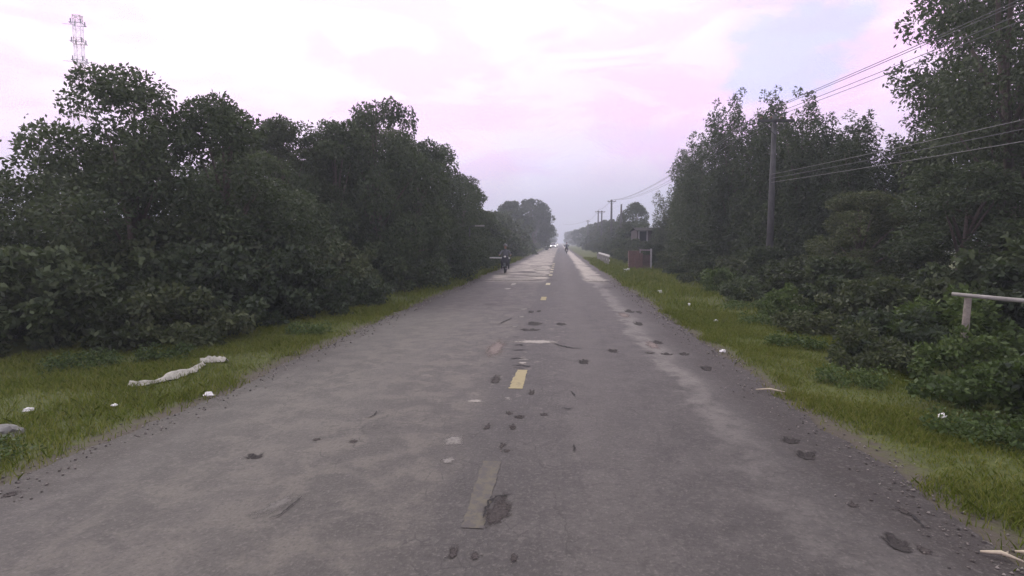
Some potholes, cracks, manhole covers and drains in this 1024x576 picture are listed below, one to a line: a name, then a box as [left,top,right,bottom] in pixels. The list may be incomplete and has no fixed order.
pothole [882,532,912,553]
pothole [797,450,816,460]
pothole [485,494,511,524]
